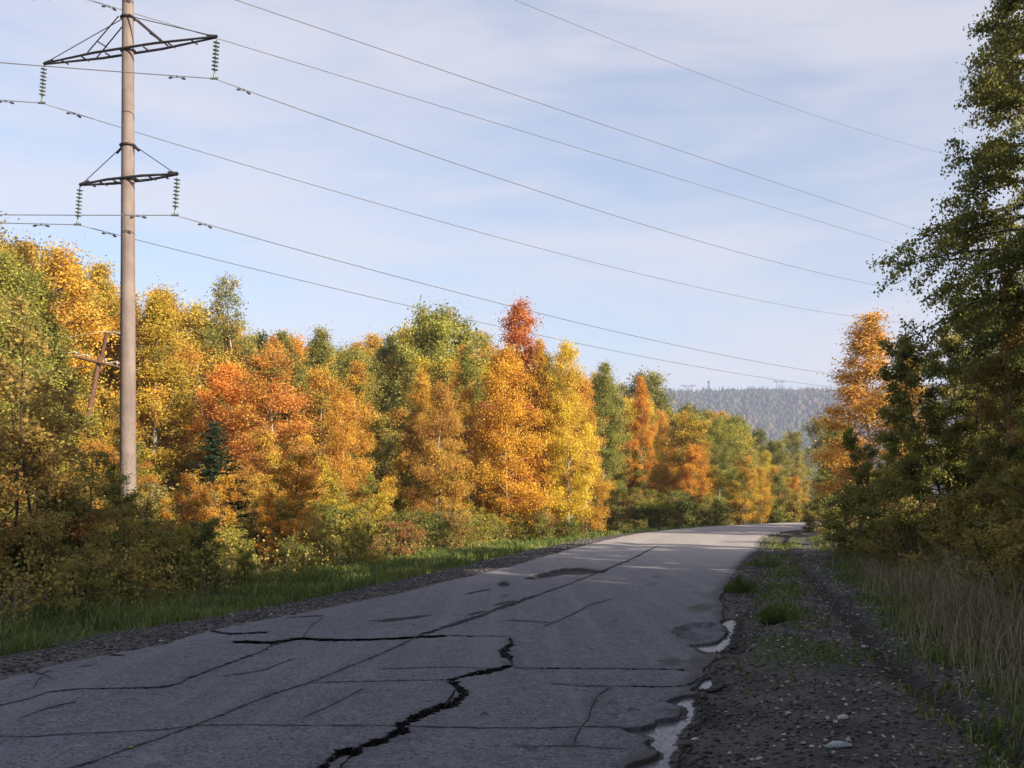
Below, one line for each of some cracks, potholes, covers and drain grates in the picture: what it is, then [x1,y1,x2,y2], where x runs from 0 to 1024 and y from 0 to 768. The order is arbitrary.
pothole [692,678,714,696]
pothole [630,697,702,768]
crack [0,546,696,768]
pothole [526,568,608,580]
pothole [690,619,739,659]
pothole [671,623,726,641]
